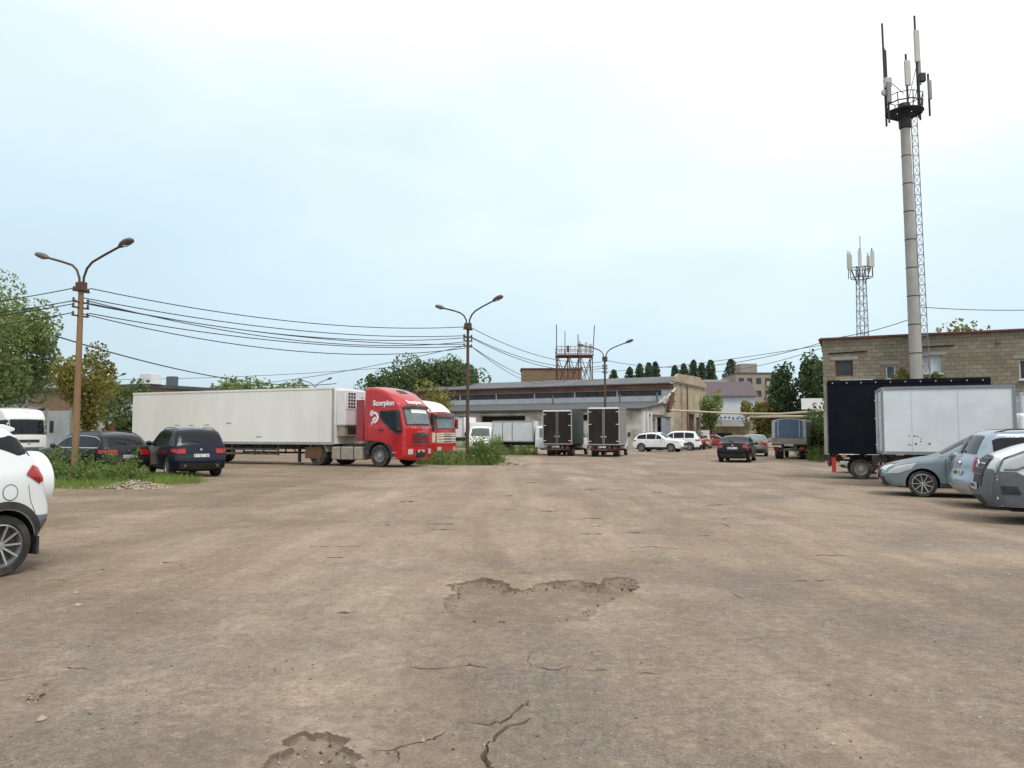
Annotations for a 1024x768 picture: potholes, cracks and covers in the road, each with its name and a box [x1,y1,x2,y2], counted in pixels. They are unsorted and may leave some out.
pothole [261,731,364,768]
crack [527,656,607,671]
crack [469,699,531,768]
crack [368,731,445,767]
pothole [442,577,642,625]
